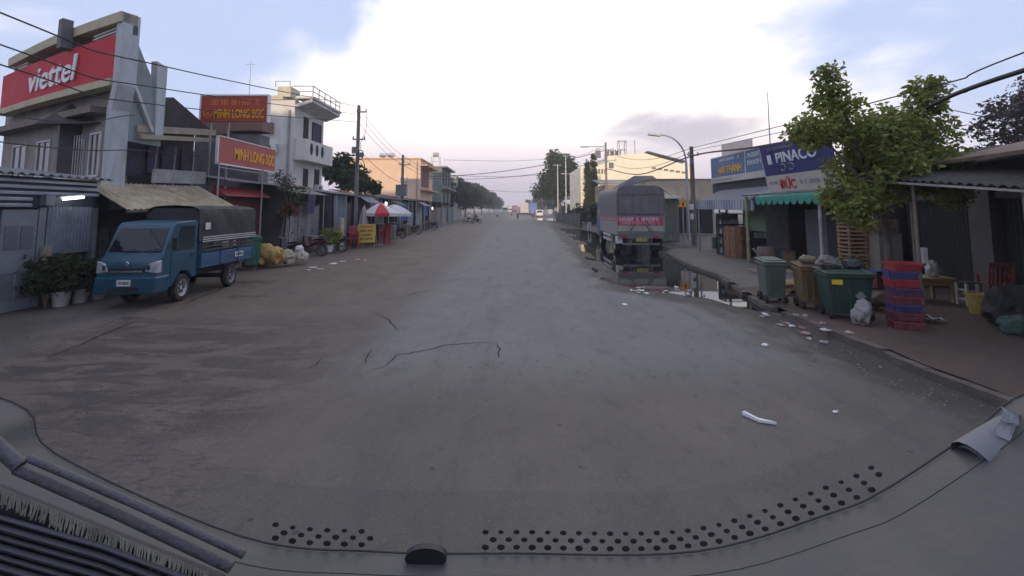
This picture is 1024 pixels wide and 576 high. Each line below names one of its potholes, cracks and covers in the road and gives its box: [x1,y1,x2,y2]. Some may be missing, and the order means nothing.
crack [365,342,501,369]
